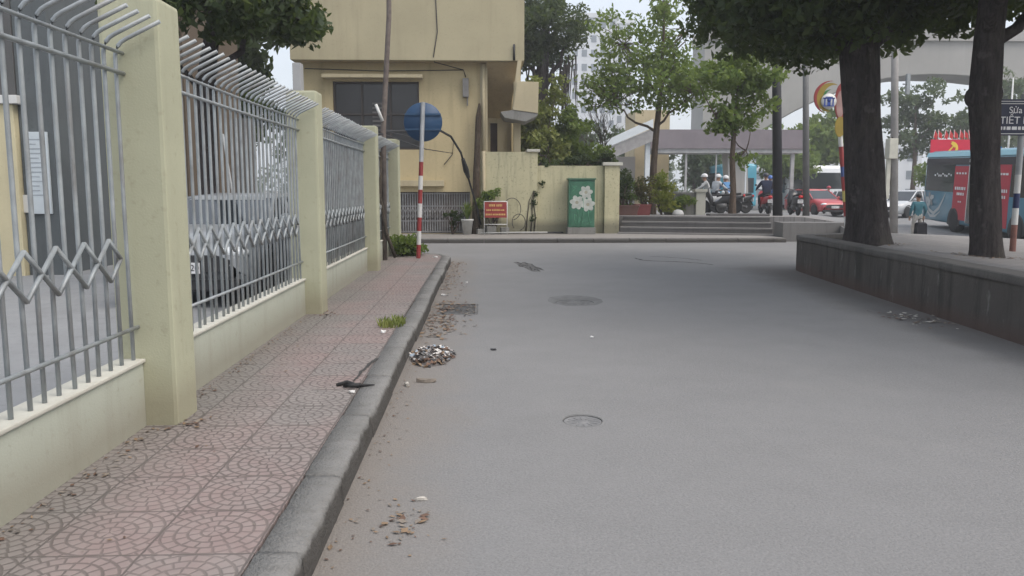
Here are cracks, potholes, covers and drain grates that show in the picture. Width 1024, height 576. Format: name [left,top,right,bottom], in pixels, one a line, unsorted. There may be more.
drain grate [436,304,478,315]
manhole cover [548,295,603,306]
manhole cover [562,414,603,427]
